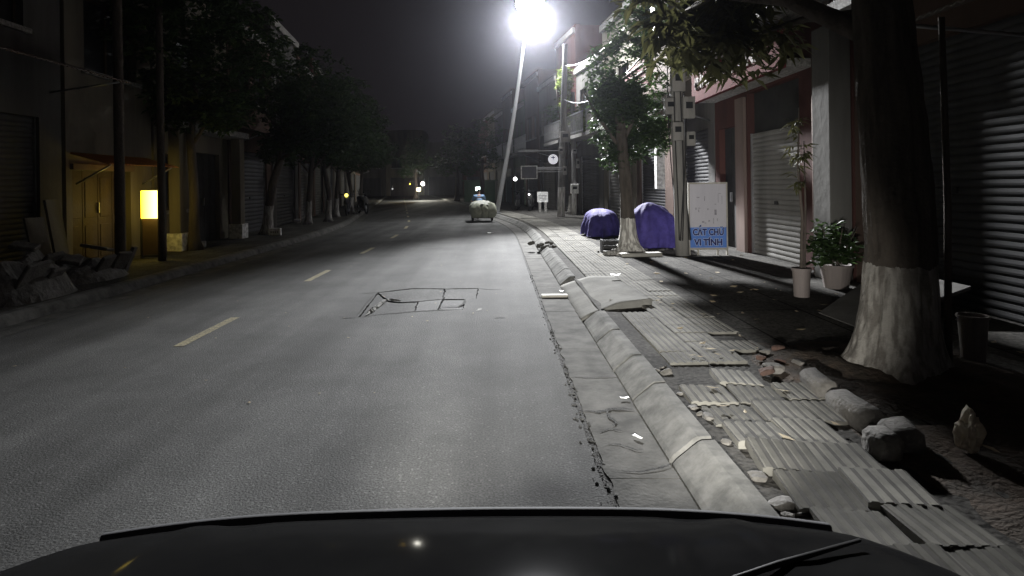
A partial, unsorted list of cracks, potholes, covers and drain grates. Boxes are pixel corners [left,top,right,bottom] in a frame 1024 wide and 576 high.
crack [348,221,671,507]
